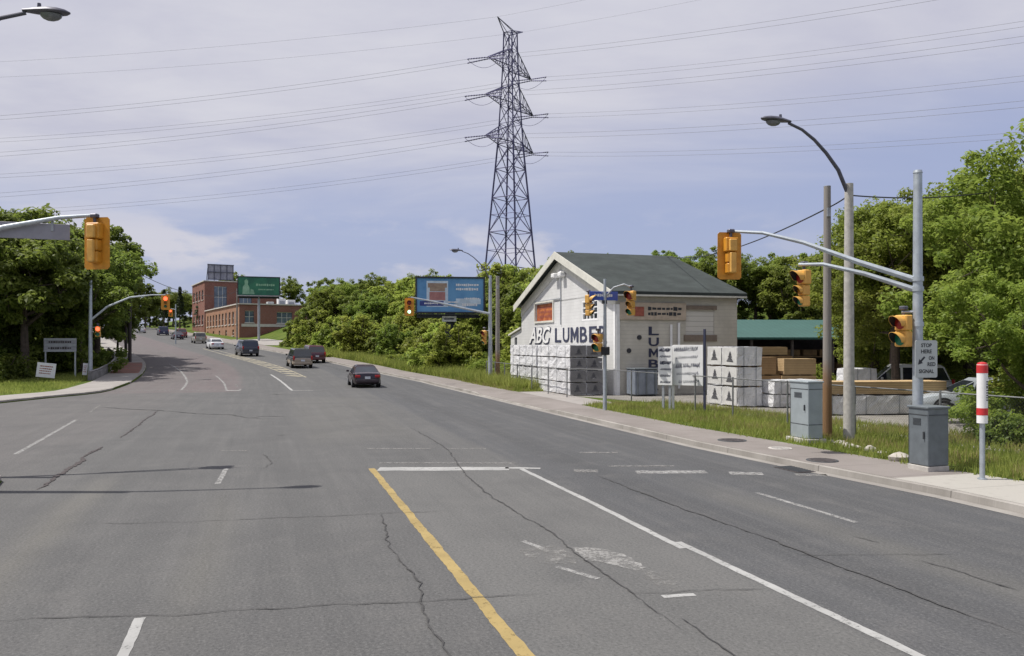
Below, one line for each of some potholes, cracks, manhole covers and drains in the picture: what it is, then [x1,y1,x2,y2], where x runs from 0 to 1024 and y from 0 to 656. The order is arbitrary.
crack [410,427,709,628]
crack [13,510,543,656]
crack [598,475,1024,635]
